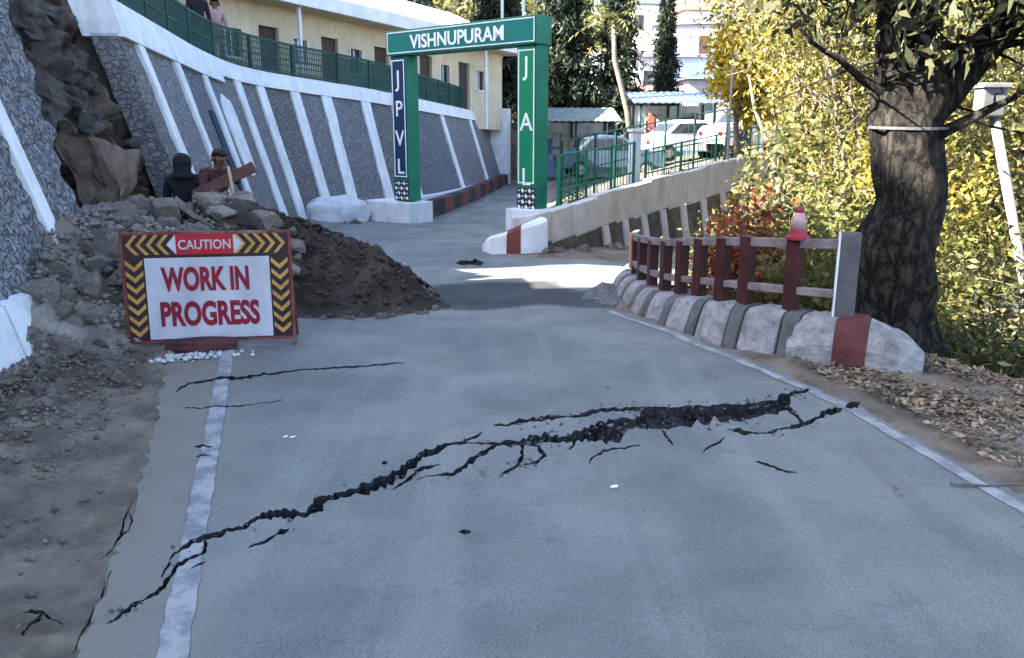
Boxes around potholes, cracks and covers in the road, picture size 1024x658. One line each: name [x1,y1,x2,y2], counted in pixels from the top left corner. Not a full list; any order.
crack [22,609,64,636]
crack [175,362,403,409]
crack [101,389,860,623]
